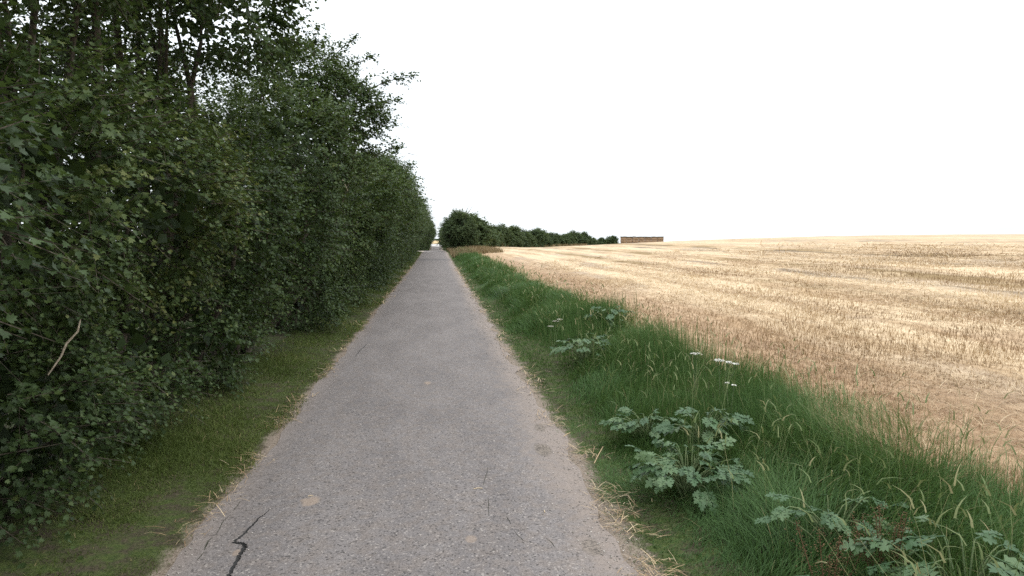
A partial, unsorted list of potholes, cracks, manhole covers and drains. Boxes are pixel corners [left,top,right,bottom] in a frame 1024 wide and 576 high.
crack [197,501,270,576]
